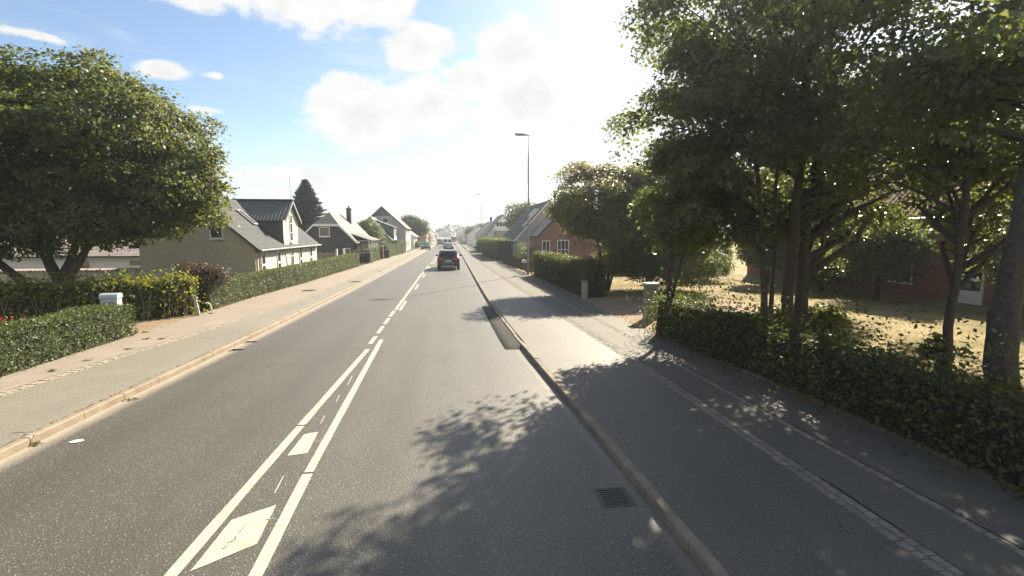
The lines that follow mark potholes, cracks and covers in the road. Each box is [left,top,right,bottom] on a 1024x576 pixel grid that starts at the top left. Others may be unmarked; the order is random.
drain grate [593,487,637,508]
